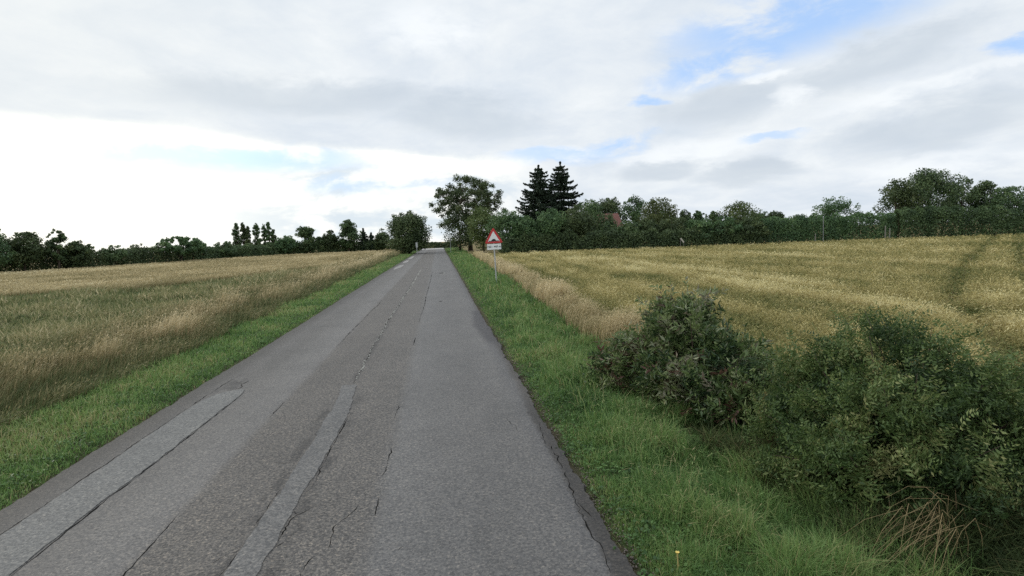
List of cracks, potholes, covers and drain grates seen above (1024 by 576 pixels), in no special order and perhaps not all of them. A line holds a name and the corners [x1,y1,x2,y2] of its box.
crack [257,492,309,546]
crack [539,422,611,573]
crack [308,413,351,491]
crack [354,270,421,382]
